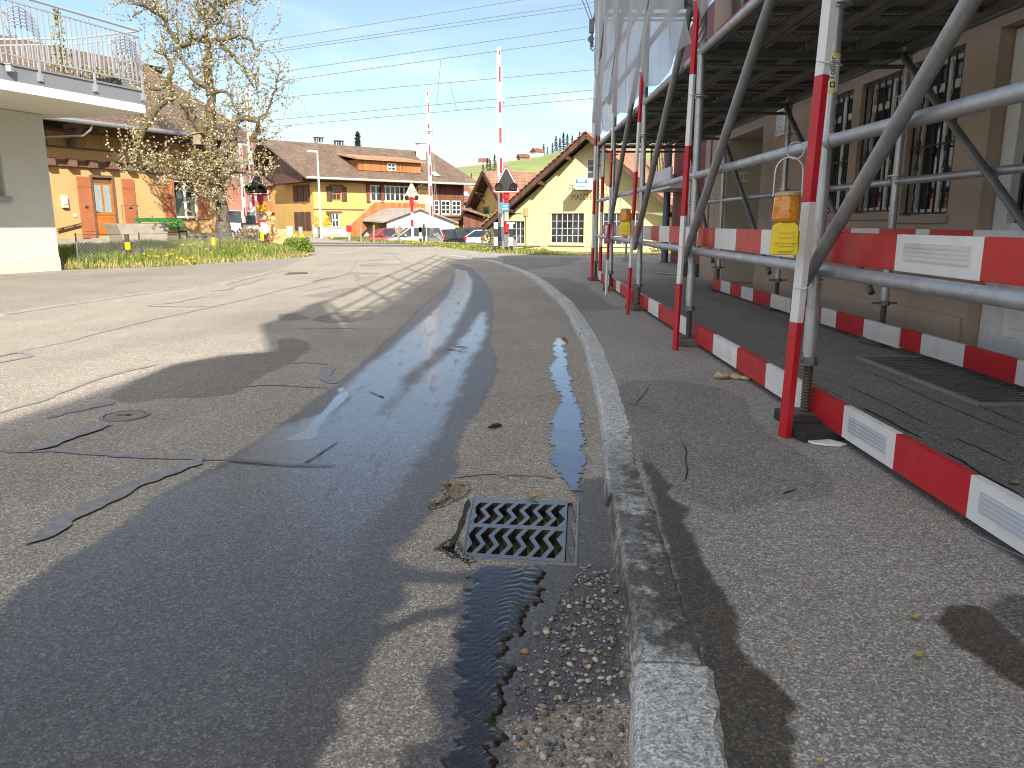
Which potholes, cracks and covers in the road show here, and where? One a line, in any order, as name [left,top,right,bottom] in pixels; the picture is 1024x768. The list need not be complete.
crack [444,499,470,550]
drain grate [461,498,580,566]
manhole cover [99,410,150,422]
